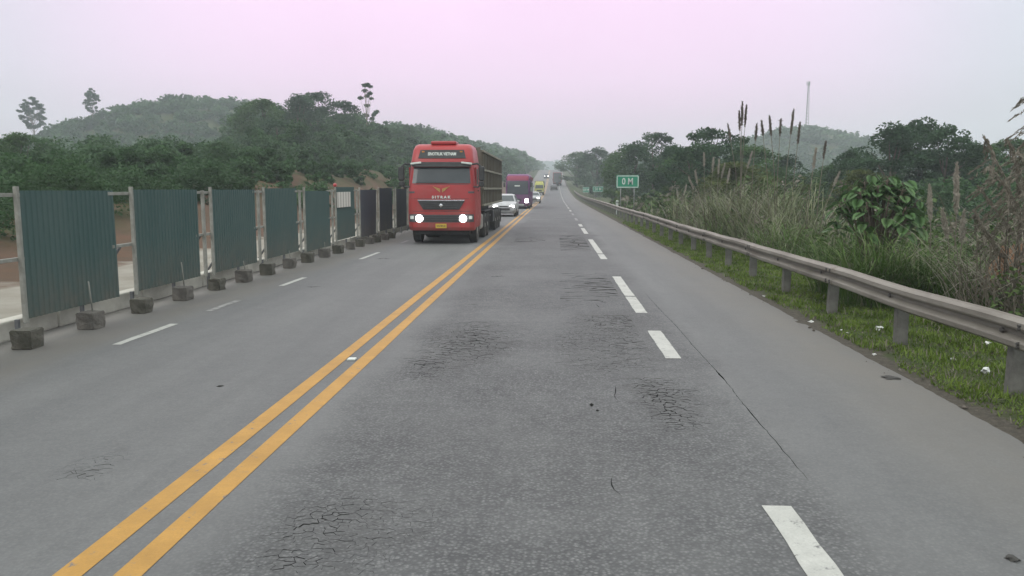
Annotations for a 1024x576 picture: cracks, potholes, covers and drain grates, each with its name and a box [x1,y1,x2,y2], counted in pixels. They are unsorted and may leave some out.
crack [52,452,128,480]
crack [614,378,709,437]
crack [401,322,524,383]
crack [559,235,588,251]
crack [243,489,453,575]
crack [555,272,657,372]
